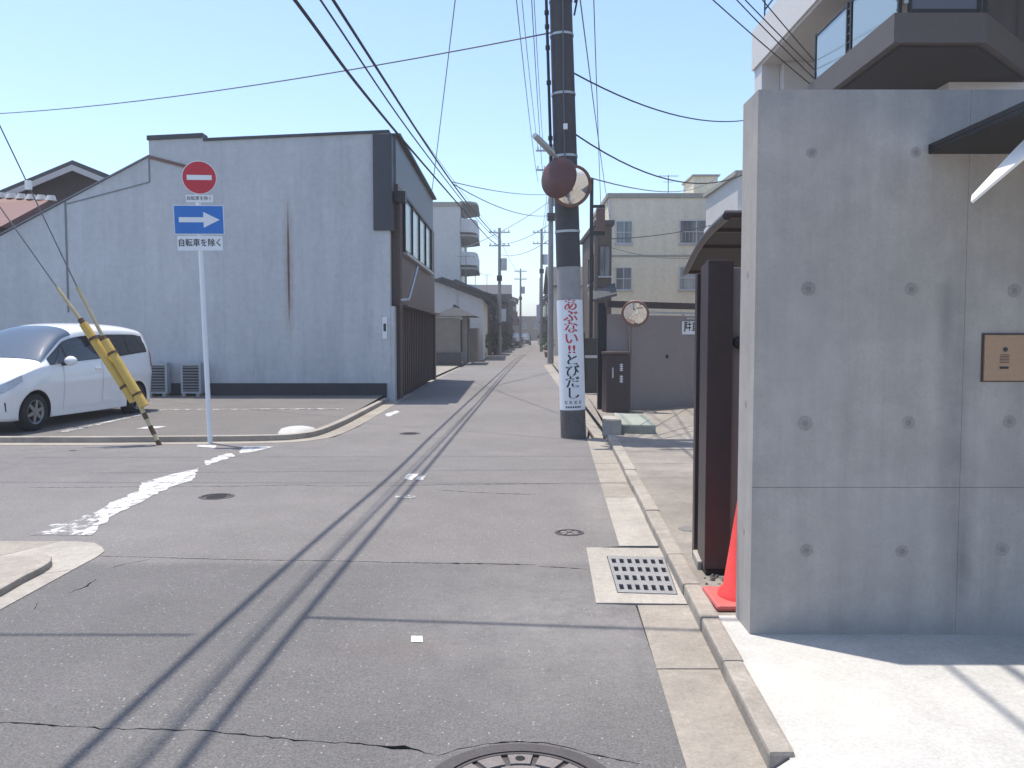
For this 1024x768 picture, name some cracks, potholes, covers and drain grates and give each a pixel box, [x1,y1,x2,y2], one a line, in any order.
crack [34,556,579,609]
manhole cover [435,743,606,768]
crack [0,722,639,764]
drain grate [586,547,687,611]
